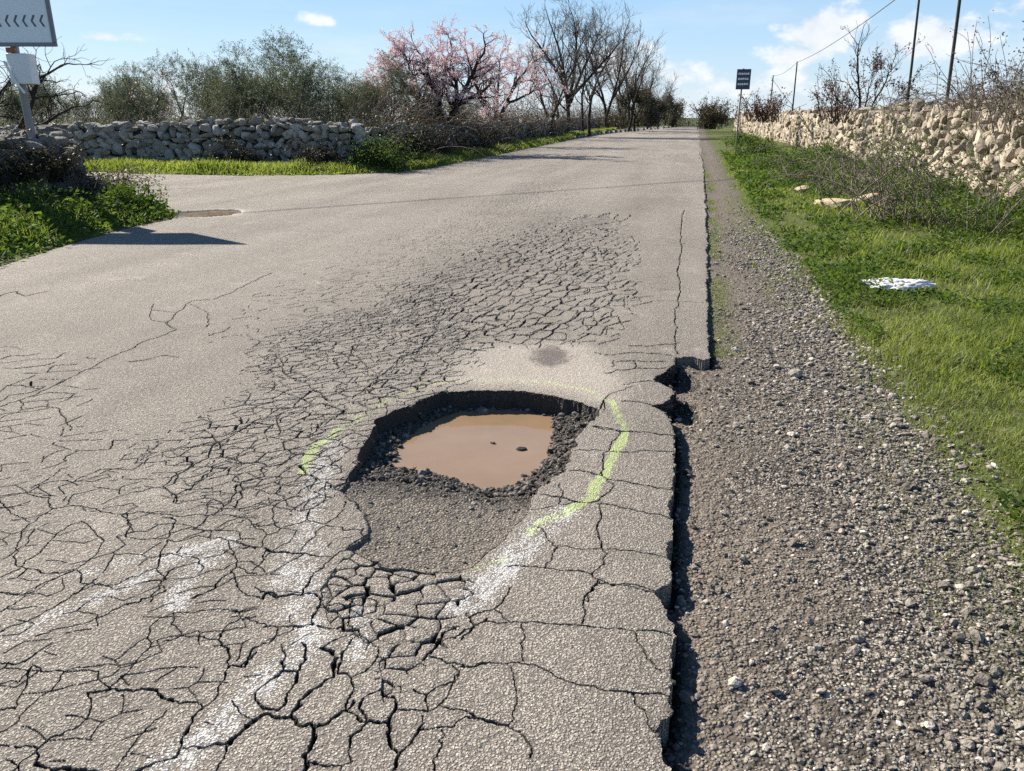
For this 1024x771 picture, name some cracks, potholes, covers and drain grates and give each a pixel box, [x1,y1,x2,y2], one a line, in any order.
pothole [339,390,599,576]
crack [0,179,708,771]
